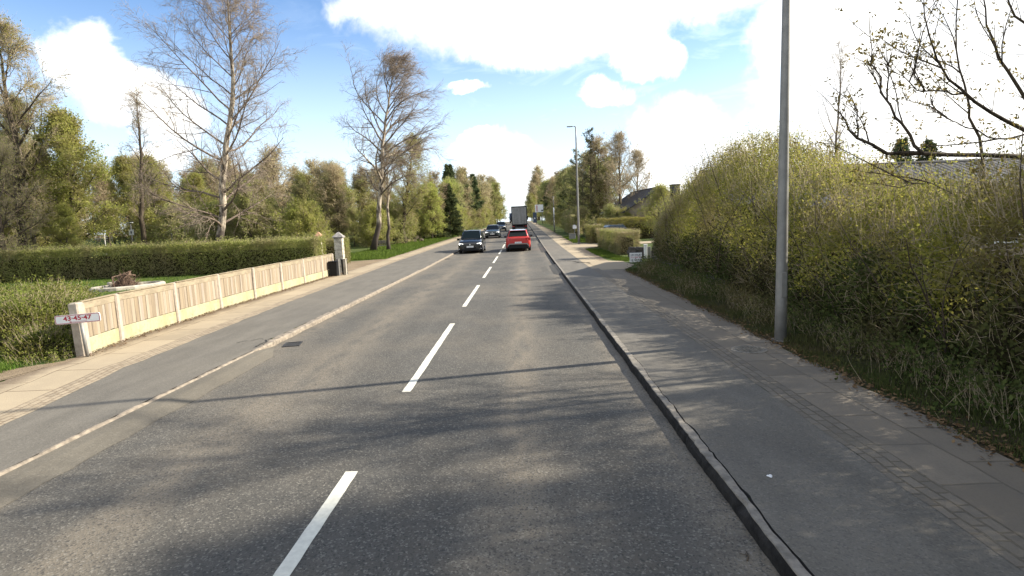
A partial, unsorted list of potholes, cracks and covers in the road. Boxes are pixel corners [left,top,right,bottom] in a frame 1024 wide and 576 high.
manhole cover [731,345,768,354]
